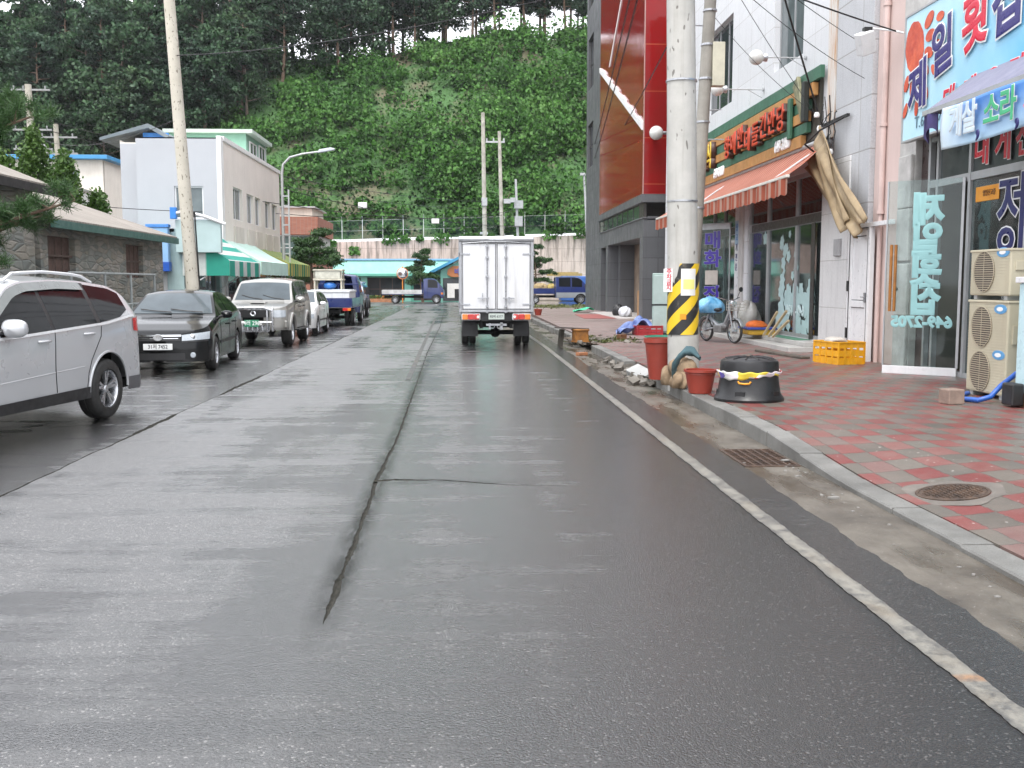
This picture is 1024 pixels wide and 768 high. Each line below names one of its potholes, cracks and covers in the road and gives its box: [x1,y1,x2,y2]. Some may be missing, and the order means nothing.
crack [323,313,556,623]
manhole cover [901,481,1007,506]
drain grate [719,449,801,467]
